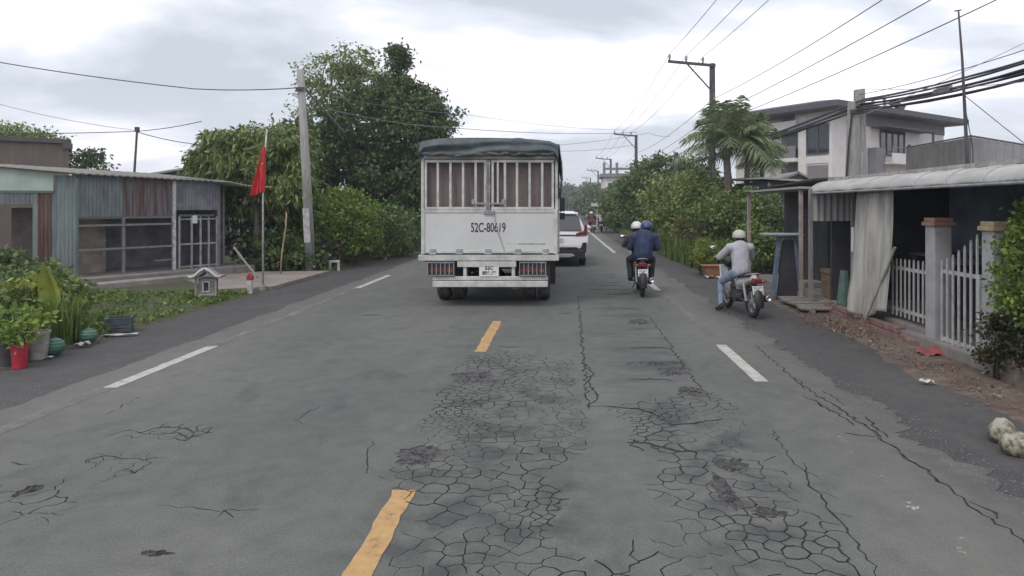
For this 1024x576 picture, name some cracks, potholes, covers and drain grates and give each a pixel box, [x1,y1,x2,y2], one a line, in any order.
crack [85,399,212,477]
pothole [709,472,744,511]
pothole [10,485,44,498]
crack [0,479,68,566]
pothole [395,445,448,467]
crack [380,345,1024,576]
pothole [711,458,749,472]
pothole [658,367,692,376]
crack [166,505,243,517]
